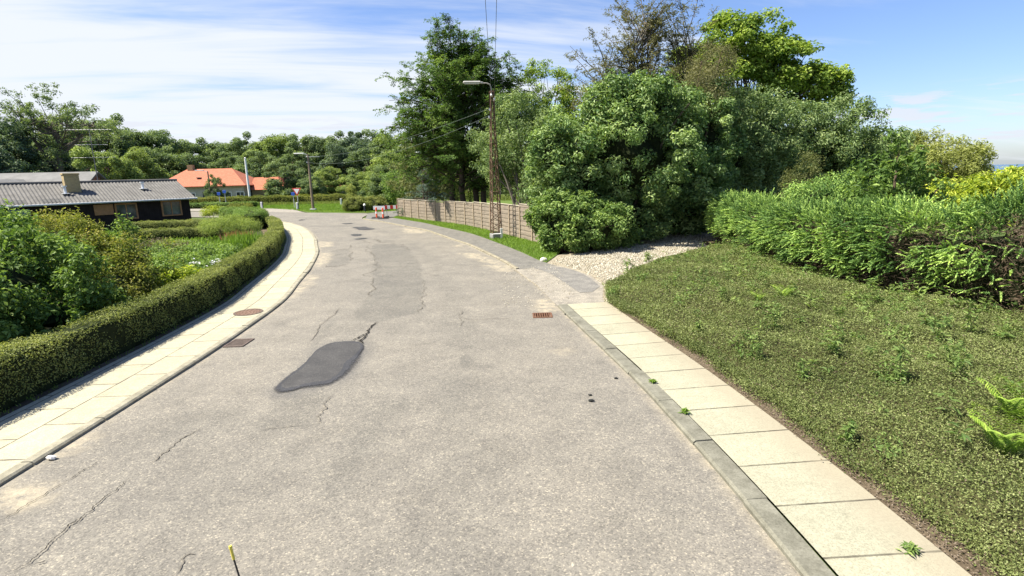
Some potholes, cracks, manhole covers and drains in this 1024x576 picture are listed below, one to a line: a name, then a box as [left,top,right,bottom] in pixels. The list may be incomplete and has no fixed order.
crack [326,239,408,295]
crack [14,474,138,570]
drain grate [223,338,255,348]
